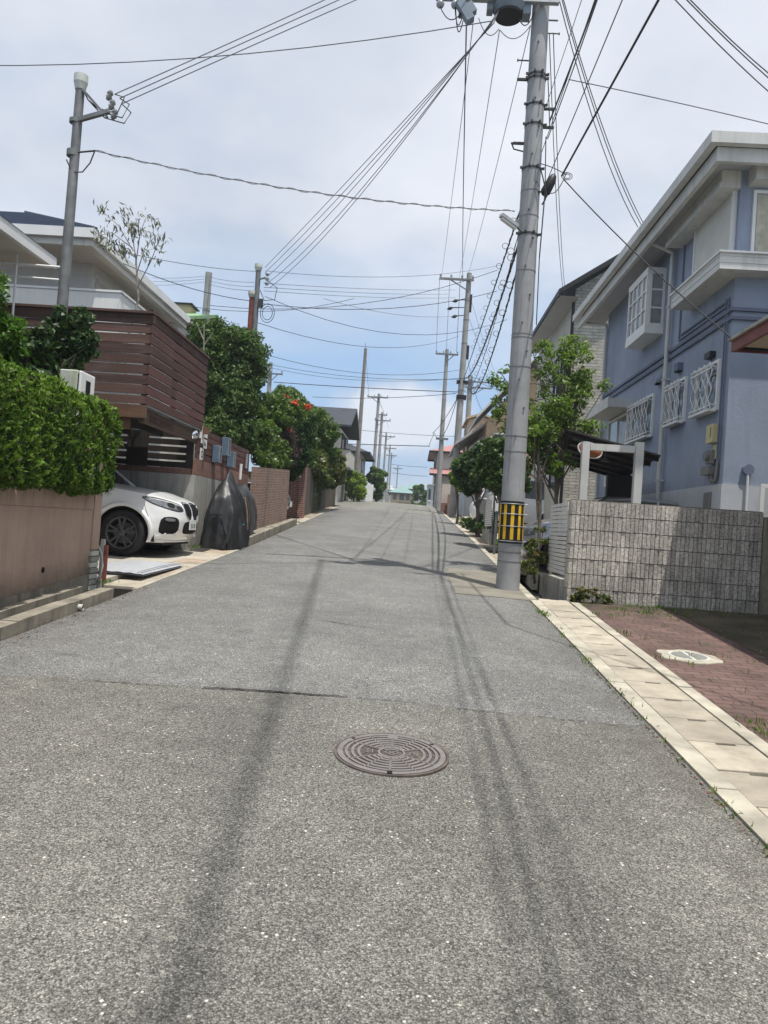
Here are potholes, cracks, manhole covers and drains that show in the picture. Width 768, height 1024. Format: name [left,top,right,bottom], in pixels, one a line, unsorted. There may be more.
manhole cover [656,649,723,664]
manhole cover [334,733,449,778]
